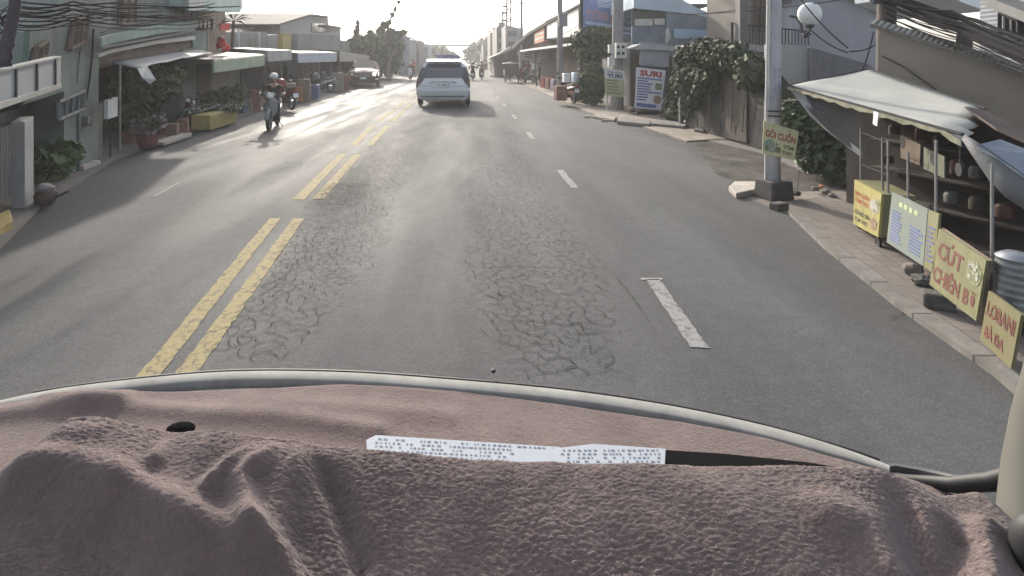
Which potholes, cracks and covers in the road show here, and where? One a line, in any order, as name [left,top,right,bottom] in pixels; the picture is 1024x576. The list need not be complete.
crack [462,115,650,379]
crack [213,115,445,361]
